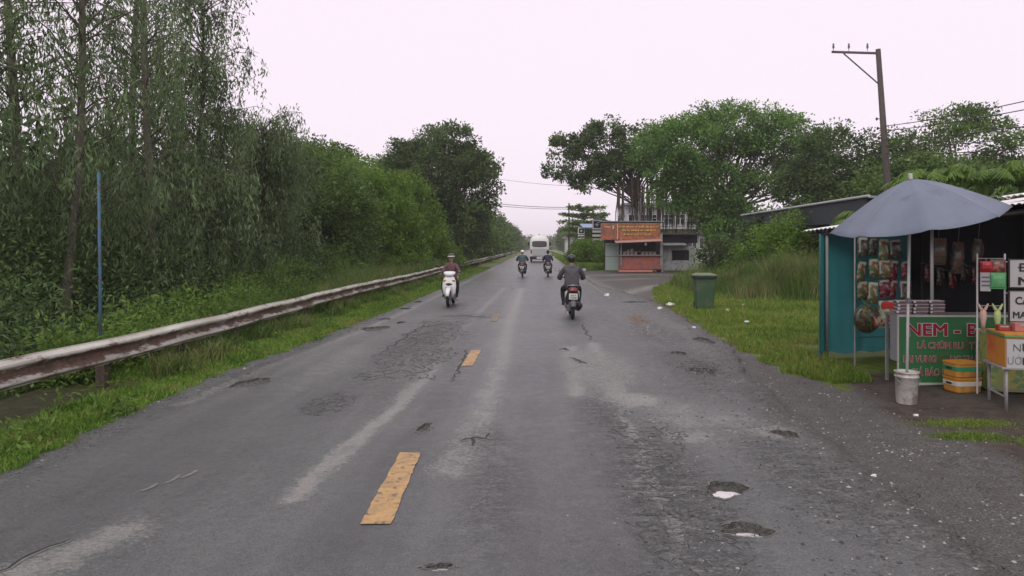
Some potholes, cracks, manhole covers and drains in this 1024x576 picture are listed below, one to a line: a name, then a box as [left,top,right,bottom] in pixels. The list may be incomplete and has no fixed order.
crack [606,422,757,576]
pothole [413,422,434,433]
pothole [222,375,272,391]
crack [354,315,481,381]
crack [460,433,493,445]
pothole [767,428,806,440]
pothole [418,561,459,572]
pothole [705,519,786,537]
crack [300,393,356,415]
pothole [704,480,761,502]
crack [0,538,72,572]
